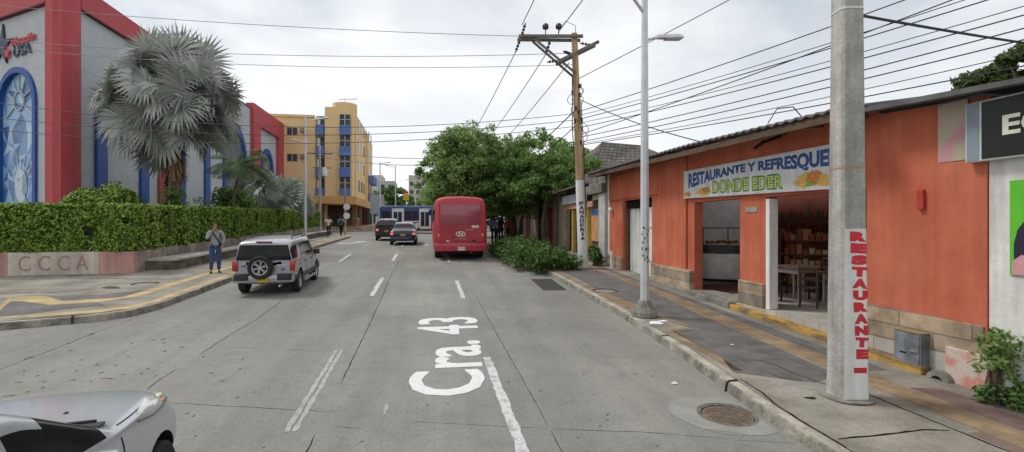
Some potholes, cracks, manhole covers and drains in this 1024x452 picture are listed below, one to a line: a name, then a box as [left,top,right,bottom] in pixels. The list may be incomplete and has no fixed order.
drain grate [531,279,566,290]
manhole cover [697,403,759,427]
crack [838,429,951,439]
